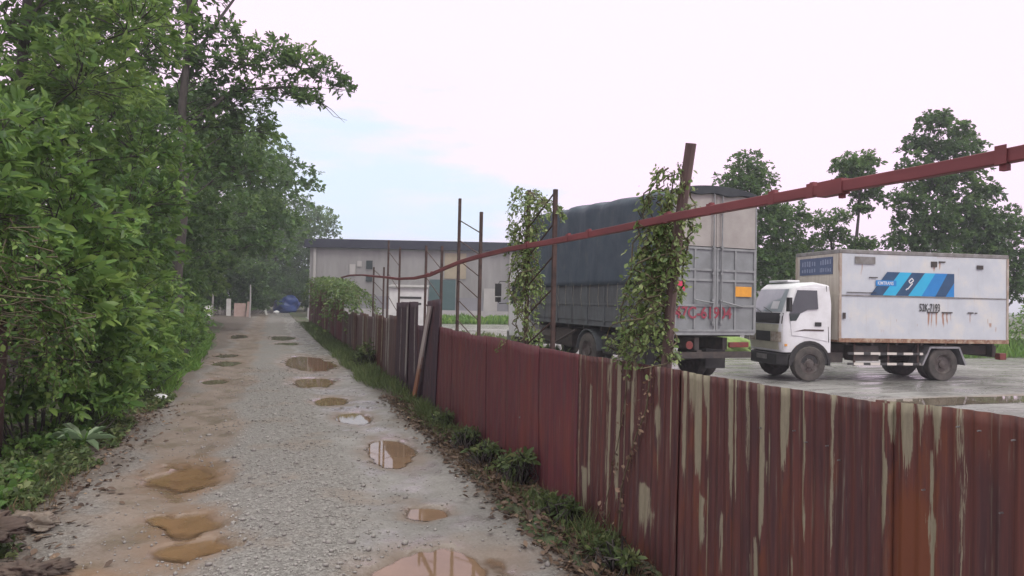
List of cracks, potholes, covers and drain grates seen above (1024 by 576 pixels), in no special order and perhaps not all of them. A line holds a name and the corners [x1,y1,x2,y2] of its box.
pothole [137,509,231,546]
pothole [281,355,341,374]
pothole [290,376,338,388]
pothole [364,437,424,470]
pothole [135,459,232,502]
pothole [402,506,452,523]
pothole [351,542,523,576]
pothole [310,396,350,407]
pothole [145,534,247,565]
pothole [331,411,374,425]
